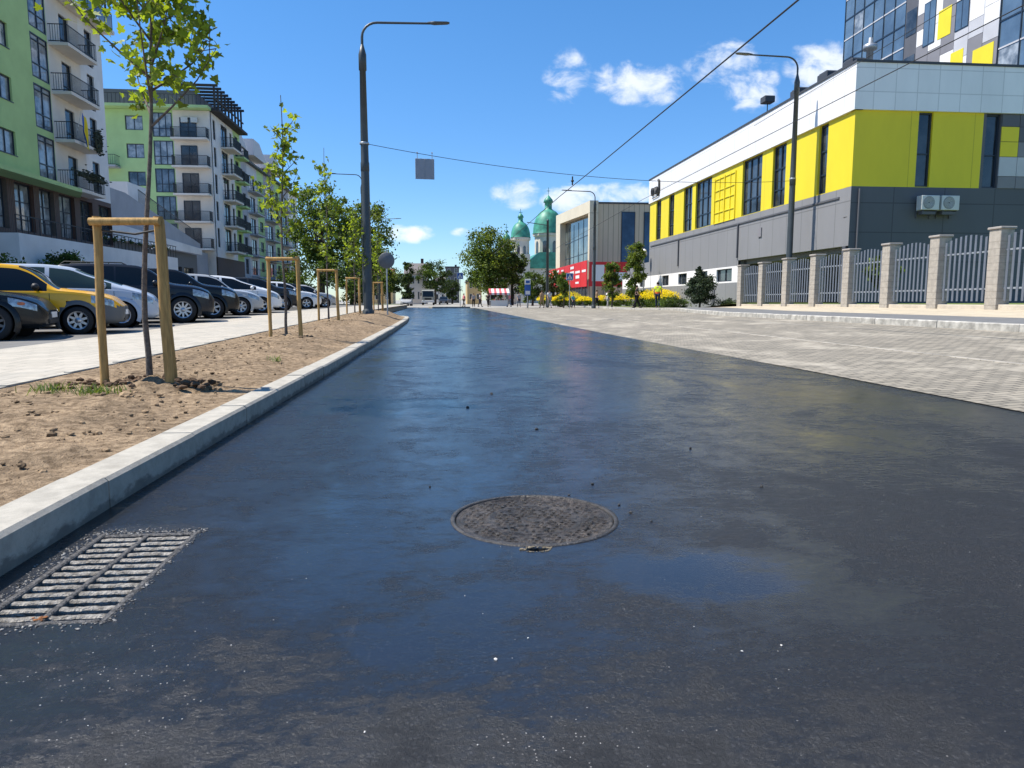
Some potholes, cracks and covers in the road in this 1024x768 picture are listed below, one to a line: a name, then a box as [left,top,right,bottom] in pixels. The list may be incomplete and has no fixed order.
manhole cover [450,495,619,547]
drain grate [0,527,209,635]
